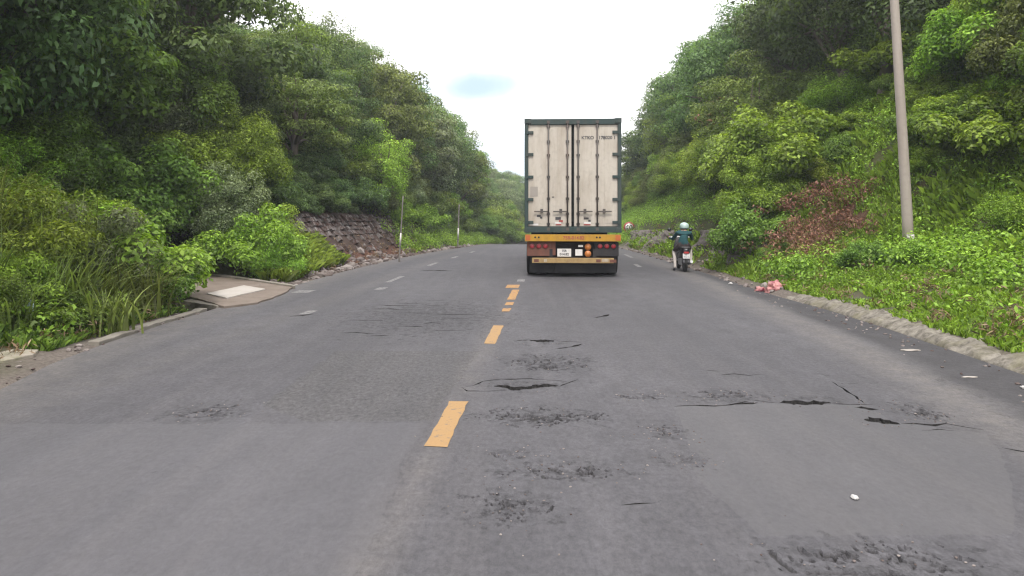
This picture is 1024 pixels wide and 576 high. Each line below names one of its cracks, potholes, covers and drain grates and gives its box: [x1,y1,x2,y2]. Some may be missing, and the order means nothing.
crack [892,402,982,431]
pothole [461,378,578,391]
